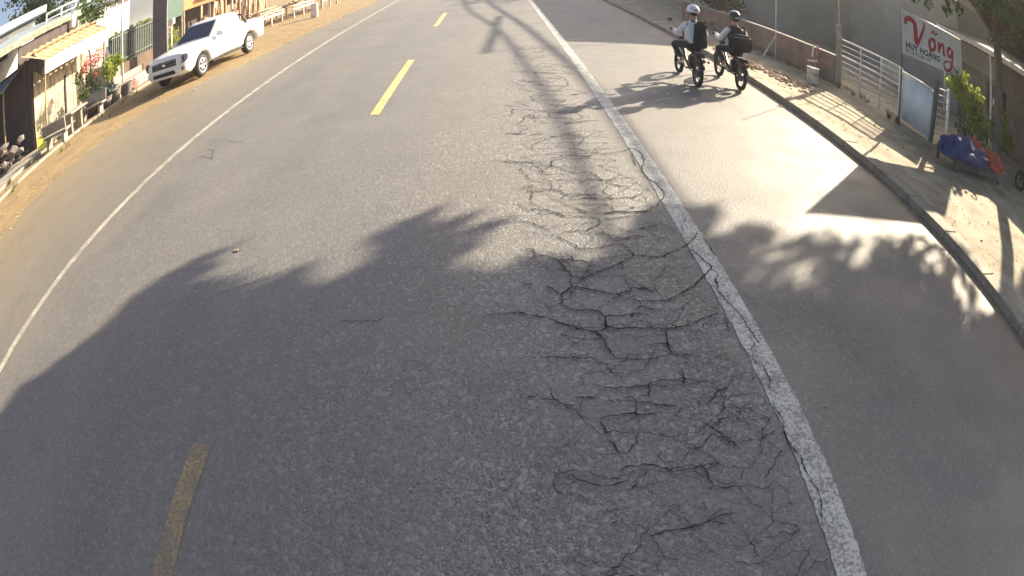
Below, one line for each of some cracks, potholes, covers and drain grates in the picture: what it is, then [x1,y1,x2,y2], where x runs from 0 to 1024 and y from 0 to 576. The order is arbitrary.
crack [502,23,665,216]
crack [487,208,830,576]
